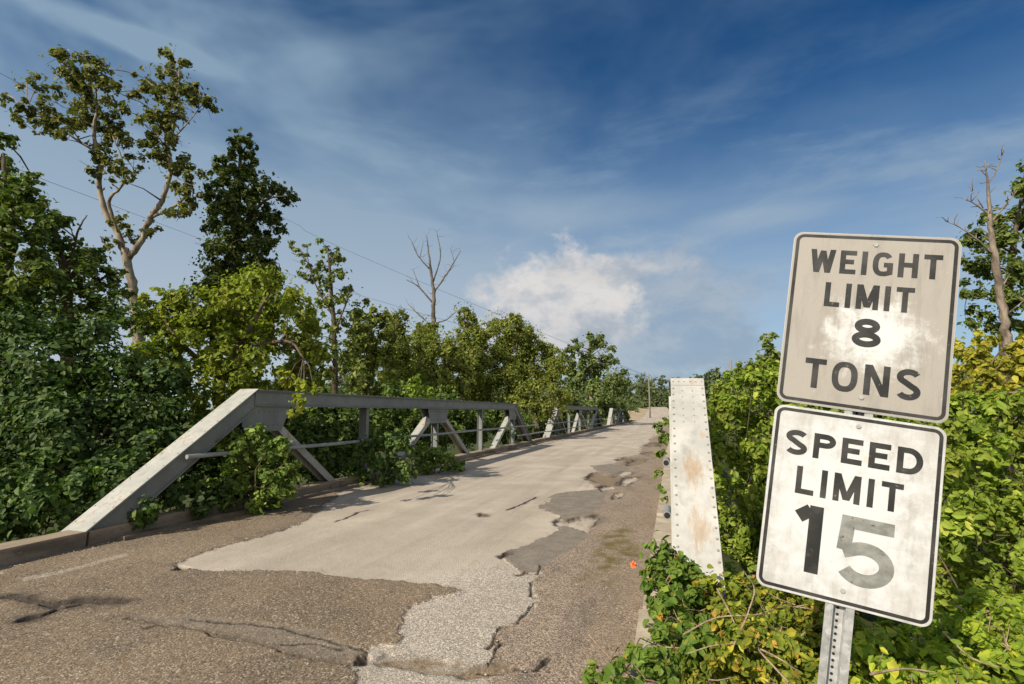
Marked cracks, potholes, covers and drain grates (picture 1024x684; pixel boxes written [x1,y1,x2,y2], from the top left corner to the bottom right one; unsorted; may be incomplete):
pothole [493,550,516,560]
pothole [607,491,629,502]
crack [0,590,365,667]
crack [502,496,541,511]
pothole [549,513,603,533]
pothole [623,476,644,487]
pothole [622,458,652,467]
pothole [581,472,626,488]
pothole [351,649,374,669]
crack [332,509,373,523]
